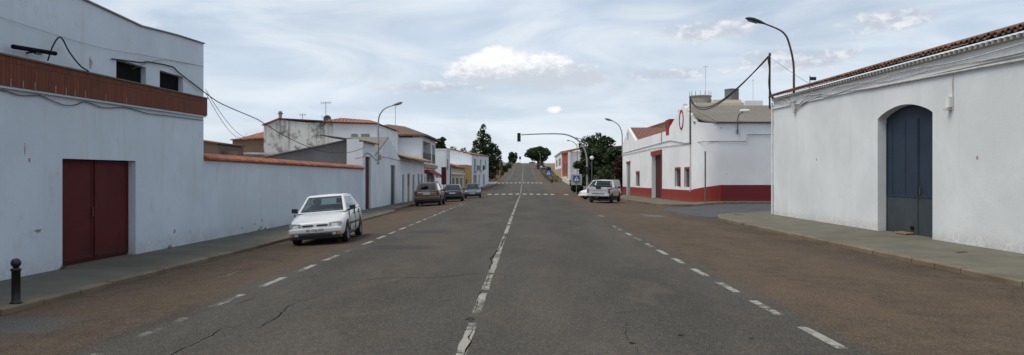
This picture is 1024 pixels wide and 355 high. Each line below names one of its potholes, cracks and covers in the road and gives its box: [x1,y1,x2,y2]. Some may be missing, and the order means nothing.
crack [171,297,315,355]
